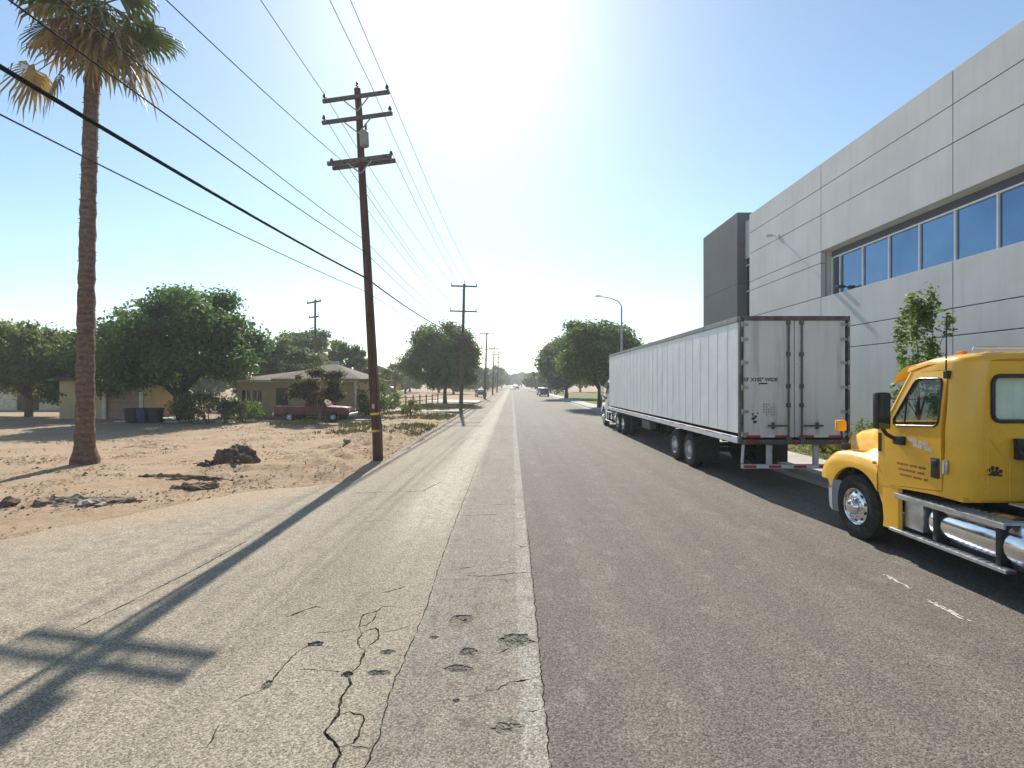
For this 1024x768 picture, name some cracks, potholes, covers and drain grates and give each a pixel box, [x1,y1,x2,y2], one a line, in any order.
crack [233,466,552,768]
pothole [443,664,474,672]
pothole [498,633,536,648]
pothole [449,615,473,624]
pothole [489,722,522,735]
pothole [458,647,478,657]
